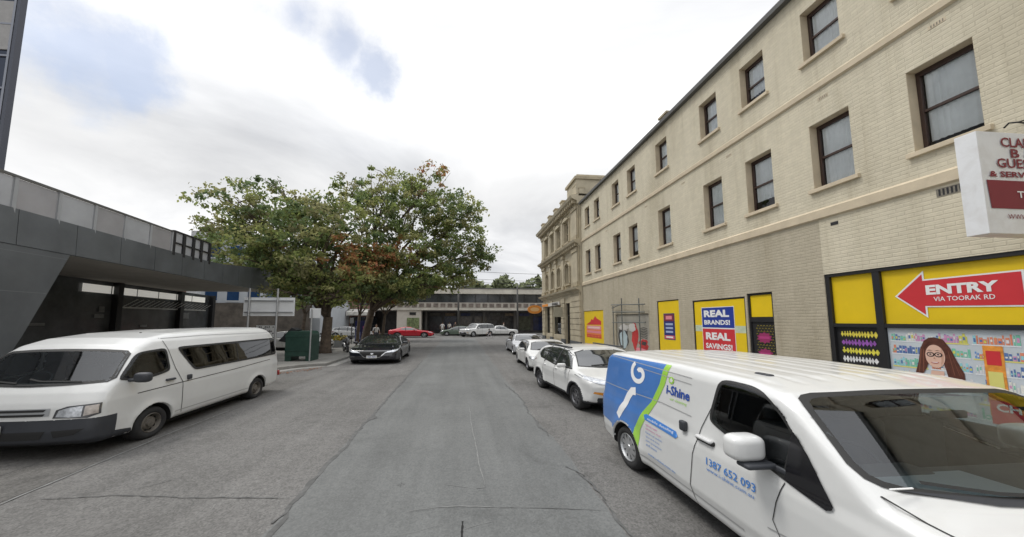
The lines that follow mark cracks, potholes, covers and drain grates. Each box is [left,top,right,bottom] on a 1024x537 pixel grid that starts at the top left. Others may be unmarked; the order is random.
crack [391,383,634,537]
